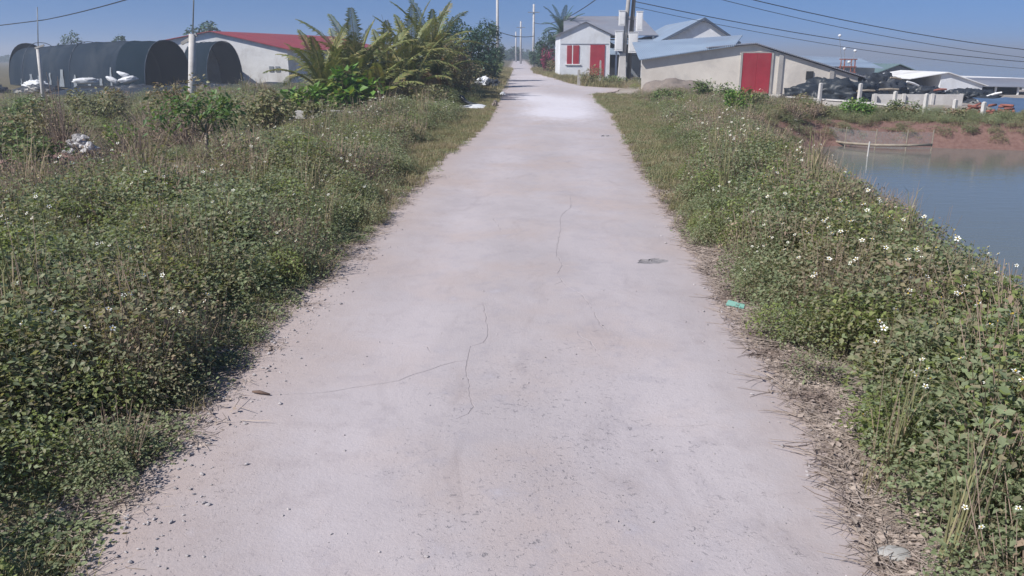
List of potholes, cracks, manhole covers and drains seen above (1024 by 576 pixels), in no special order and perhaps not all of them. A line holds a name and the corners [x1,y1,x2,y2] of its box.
crack [275,304,489,418]
crack [550,196,606,355]
